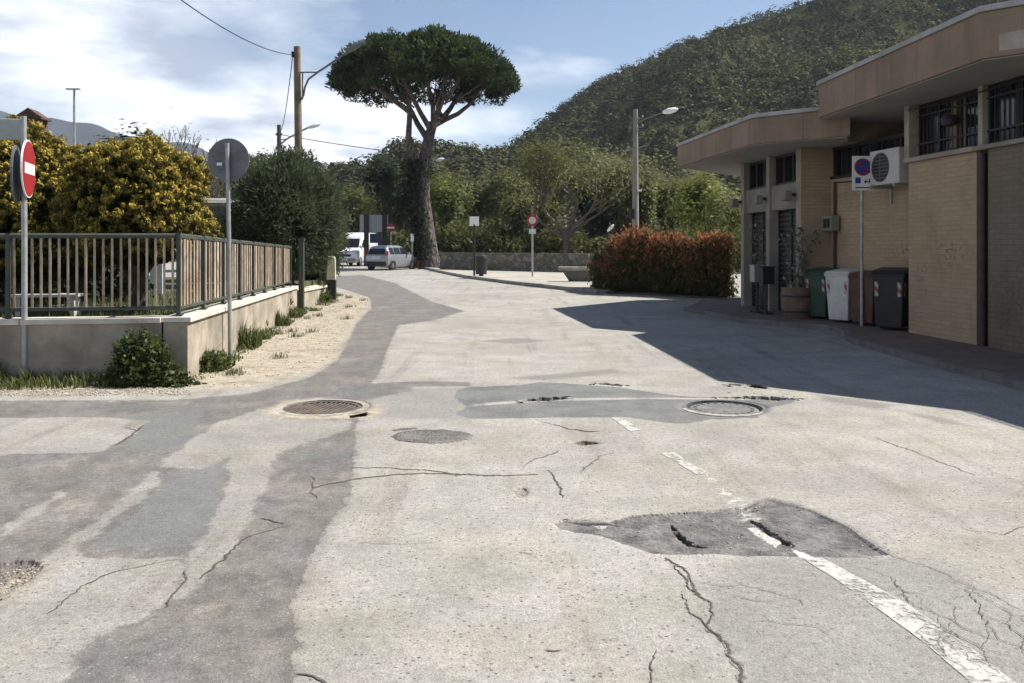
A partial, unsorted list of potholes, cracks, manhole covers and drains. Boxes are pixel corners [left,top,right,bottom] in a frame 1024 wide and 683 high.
pothole [0,556,57,599]
crack [649,558,829,683]
manhole cover [673,399,776,417]
crack [200,518,290,578]
pothole [566,439,608,448]
pothole [503,485,538,501]
crack [309,450,564,498]
crack [854,566,1024,677]
